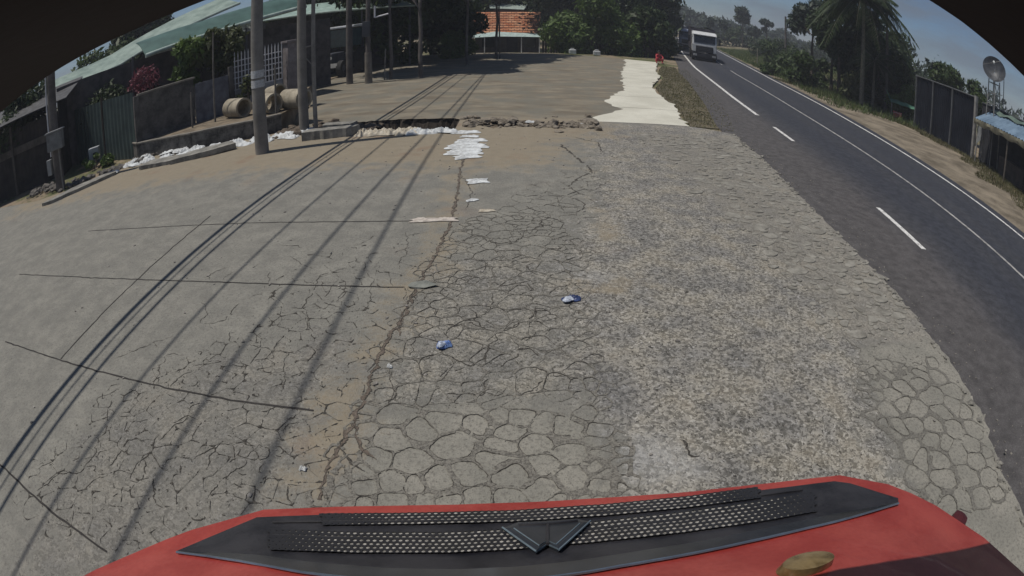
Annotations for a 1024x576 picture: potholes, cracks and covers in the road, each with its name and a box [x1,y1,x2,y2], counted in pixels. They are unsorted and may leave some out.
pothole [479,120,564,128]
crack [683,440,700,457]
crack [14,134,646,555]
pothole [357,118,460,130]
crack [766,240,1007,513]
